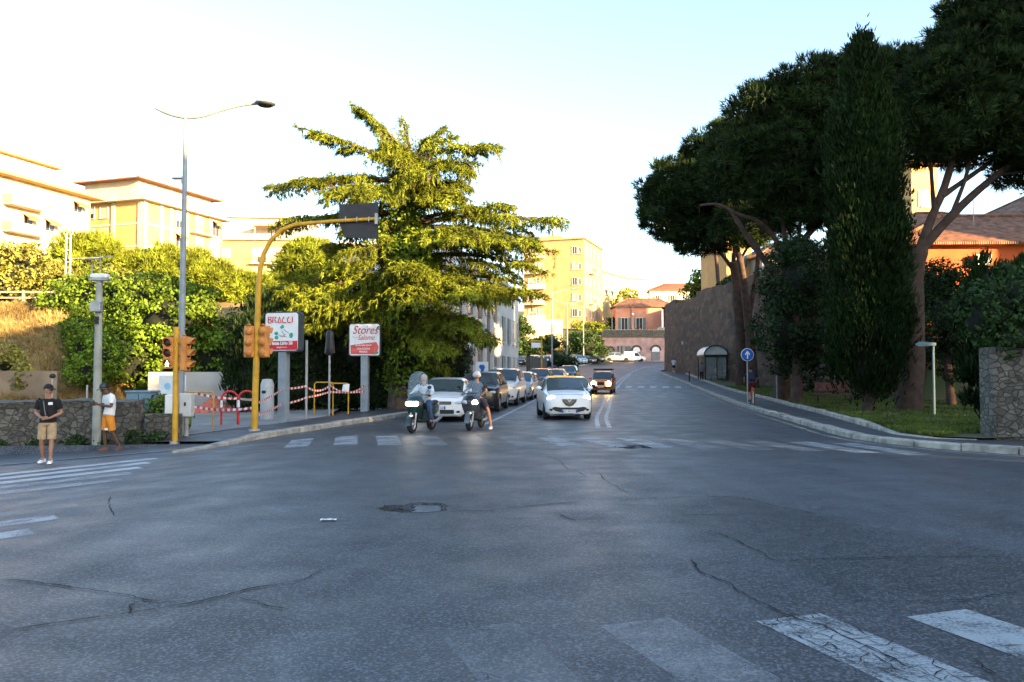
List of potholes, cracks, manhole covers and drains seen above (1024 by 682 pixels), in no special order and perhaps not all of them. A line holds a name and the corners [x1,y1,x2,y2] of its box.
crack [691,559,1022,682]
crack [3,565,330,632]
pothole [377,502,448,513]
